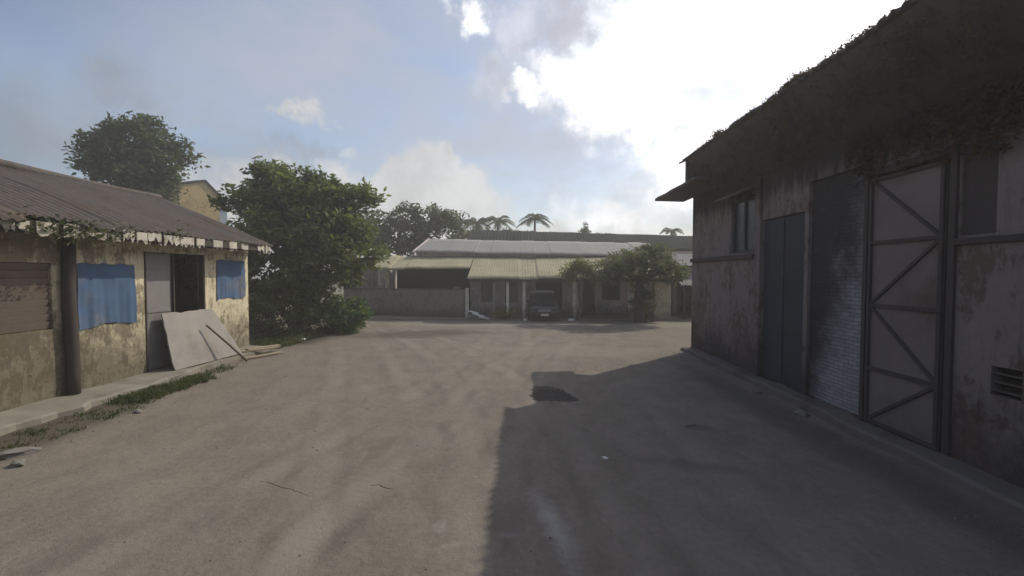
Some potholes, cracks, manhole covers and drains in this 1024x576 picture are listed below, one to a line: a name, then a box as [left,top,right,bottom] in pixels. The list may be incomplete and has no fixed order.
pothole [528,386,579,403]
